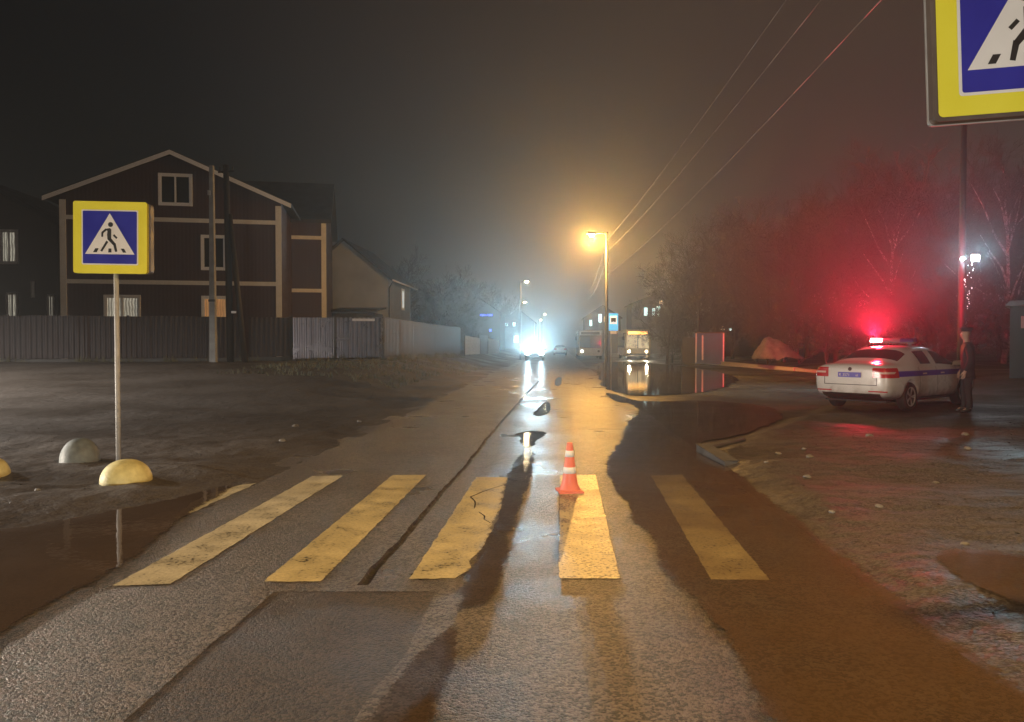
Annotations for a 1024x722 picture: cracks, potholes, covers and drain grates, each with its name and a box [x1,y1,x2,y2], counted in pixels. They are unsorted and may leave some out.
pothole [514,431,546,447]
crack [470,485,502,523]
pothole [533,401,551,416]
